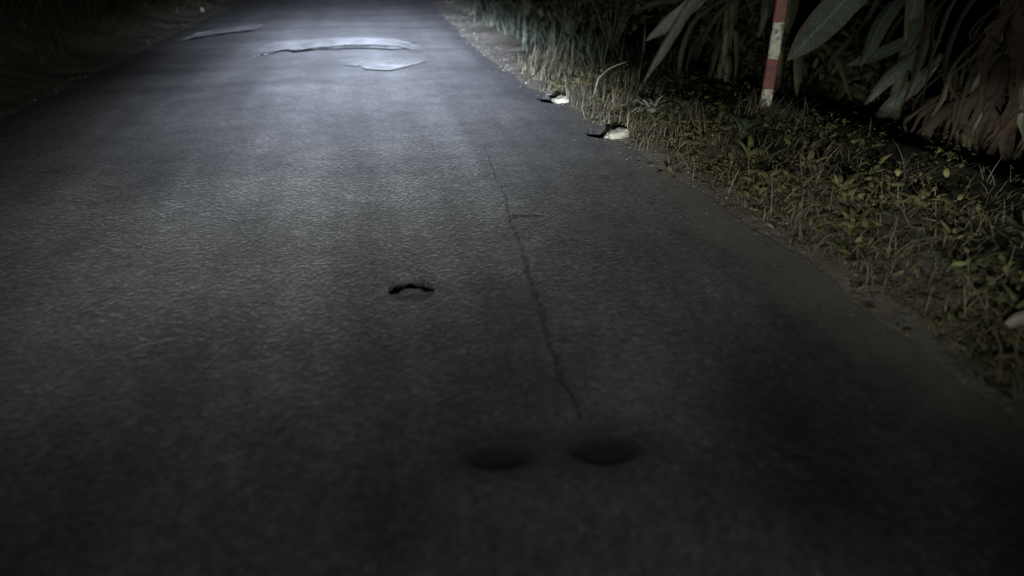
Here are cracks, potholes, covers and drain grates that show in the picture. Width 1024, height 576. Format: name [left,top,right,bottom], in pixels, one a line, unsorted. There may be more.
pothole [388,276,435,303]
pothole [567,431,649,466]
pothole [585,129,610,138]
crack [484,149,582,418]
pothole [463,440,538,472]
pothole [537,95,557,104]
